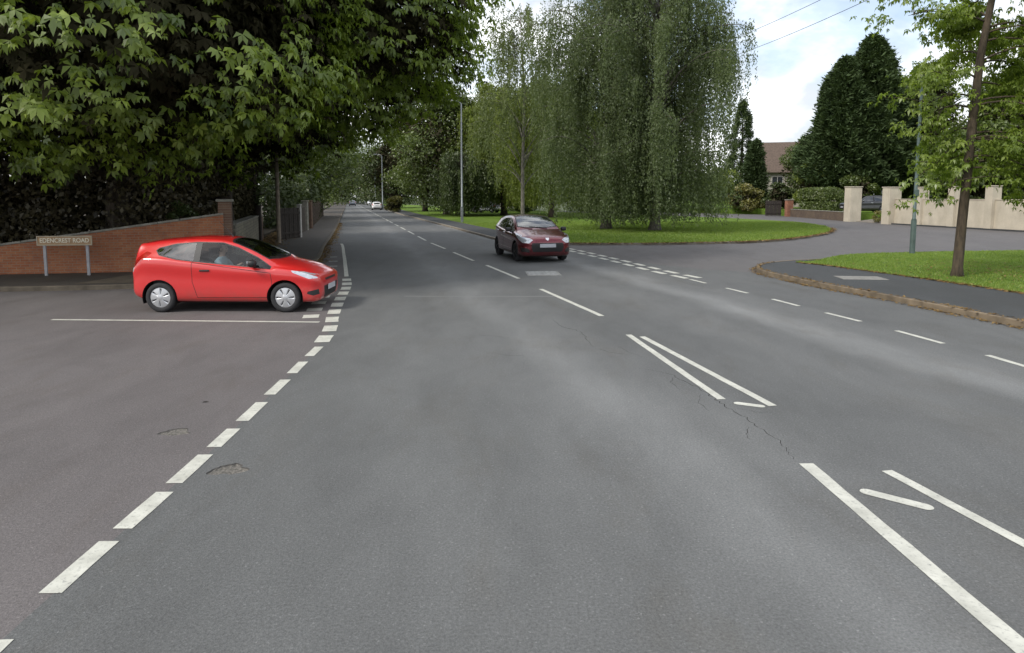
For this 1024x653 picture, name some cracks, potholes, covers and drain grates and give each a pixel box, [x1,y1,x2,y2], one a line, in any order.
pothole [158,428,190,436]
crack [660,371,794,459]
pothole [206,463,250,475]
